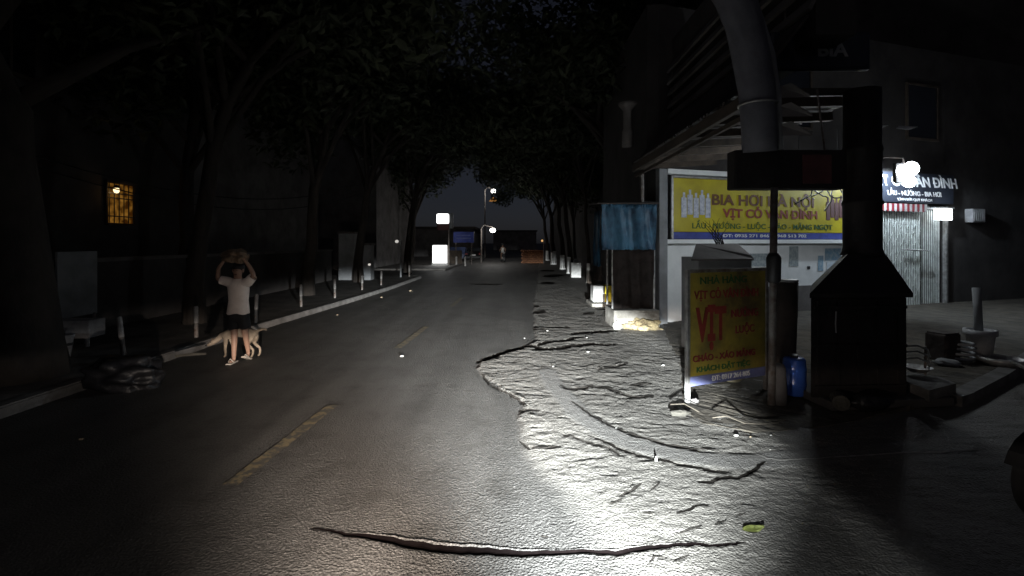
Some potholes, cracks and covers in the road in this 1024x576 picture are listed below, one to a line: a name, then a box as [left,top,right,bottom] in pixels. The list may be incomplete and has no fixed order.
crack [310,309,765,563]
